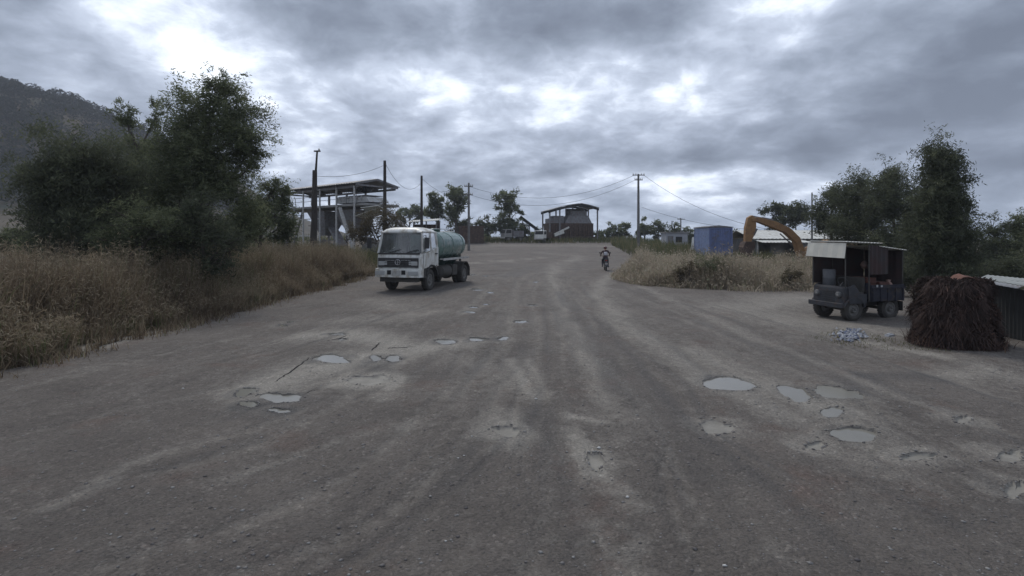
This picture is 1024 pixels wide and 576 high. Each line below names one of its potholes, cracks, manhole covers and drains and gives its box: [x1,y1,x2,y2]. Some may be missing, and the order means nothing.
pothole [267,406,292,414]
pothole [999,479,1024,500]
crack [277,335,347,393]
pothole [232,387,259,398]
pothole [772,383,816,404]
pothole [699,375,760,391]
pothole [384,354,404,362]
pothole [585,450,605,472]
pothole [992,446,1024,465]
pothole [809,383,869,400]
pothole [487,424,526,438]
pothole [819,405,845,418]
